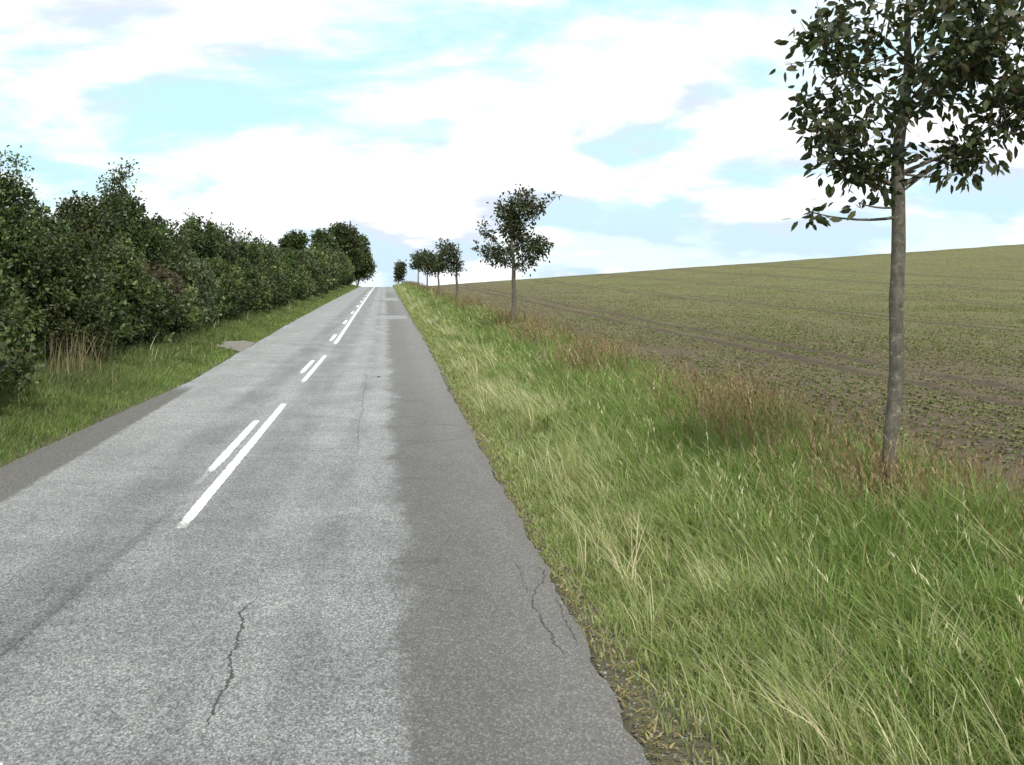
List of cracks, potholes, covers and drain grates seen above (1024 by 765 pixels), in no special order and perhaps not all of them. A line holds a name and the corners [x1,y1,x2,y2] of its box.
crack [205,569,264,732]
crack [514,562,578,661]
